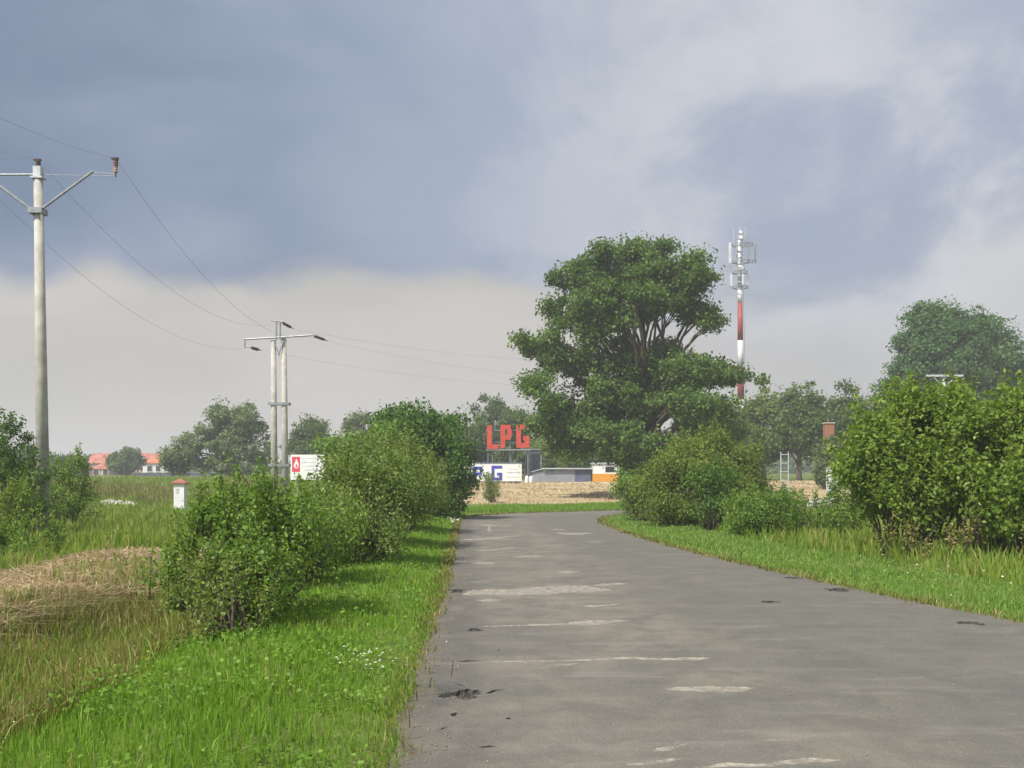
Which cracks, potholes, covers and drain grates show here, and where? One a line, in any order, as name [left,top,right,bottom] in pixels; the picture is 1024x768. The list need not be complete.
pothole [438,689,483,700]
